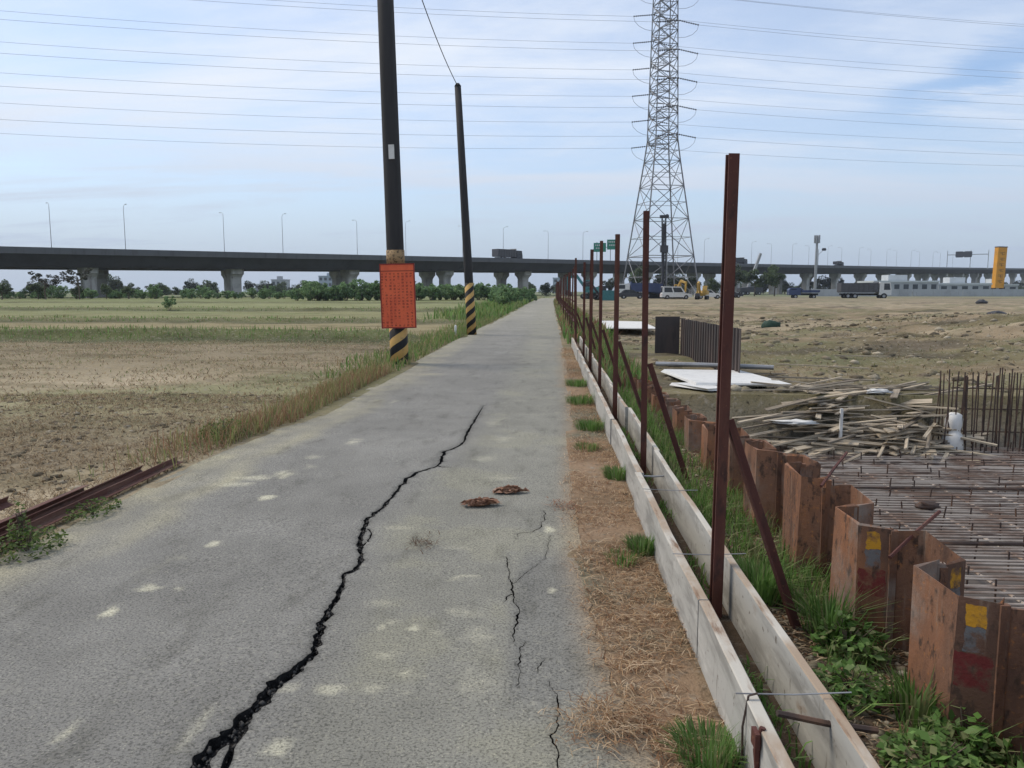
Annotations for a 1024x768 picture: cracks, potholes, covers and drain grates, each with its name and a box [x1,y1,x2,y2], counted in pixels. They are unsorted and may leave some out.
crack [190,407,483,768]
crack [504,512,561,768]
